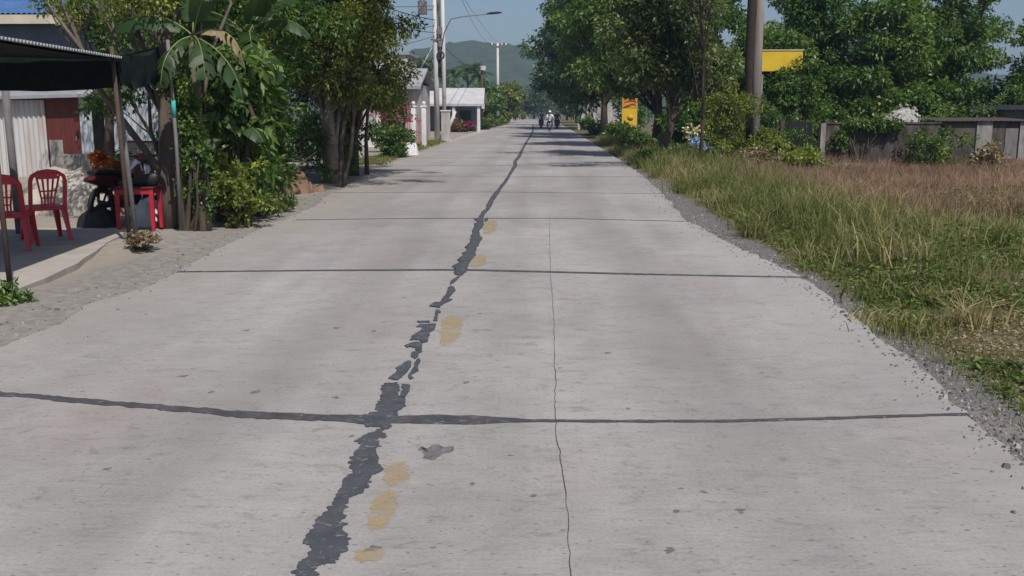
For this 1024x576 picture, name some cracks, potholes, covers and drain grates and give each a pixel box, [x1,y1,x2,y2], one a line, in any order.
crack [549,218,572,576]
